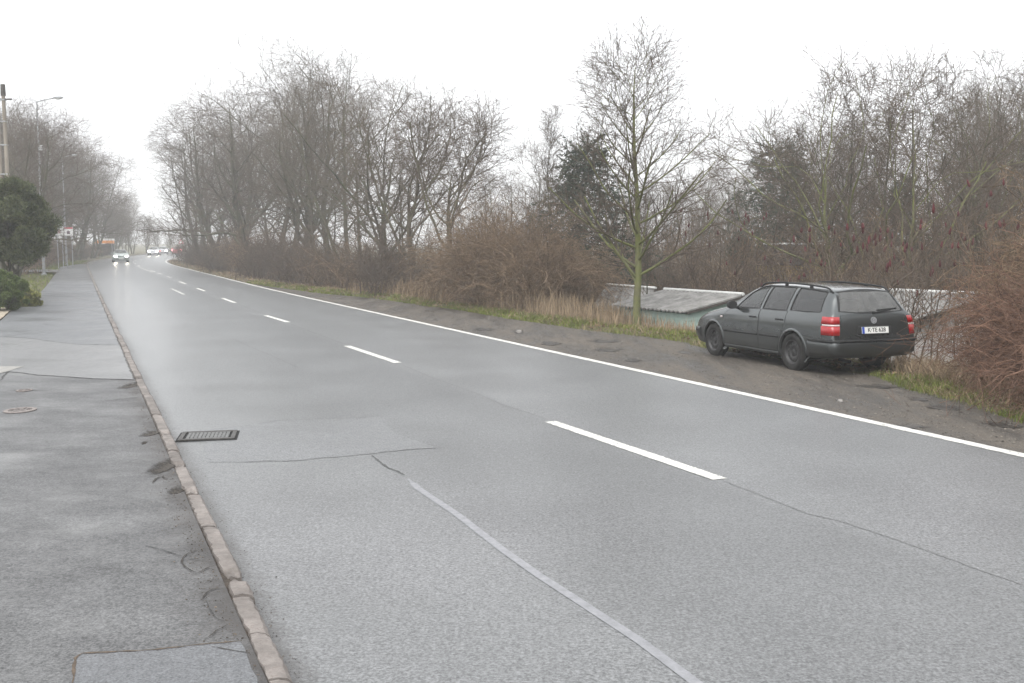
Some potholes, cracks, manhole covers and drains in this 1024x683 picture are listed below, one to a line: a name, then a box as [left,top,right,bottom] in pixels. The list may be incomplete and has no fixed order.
drain grate [175,430,240,442]
crack [250,447,442,475]
crack [72,545,251,683]
